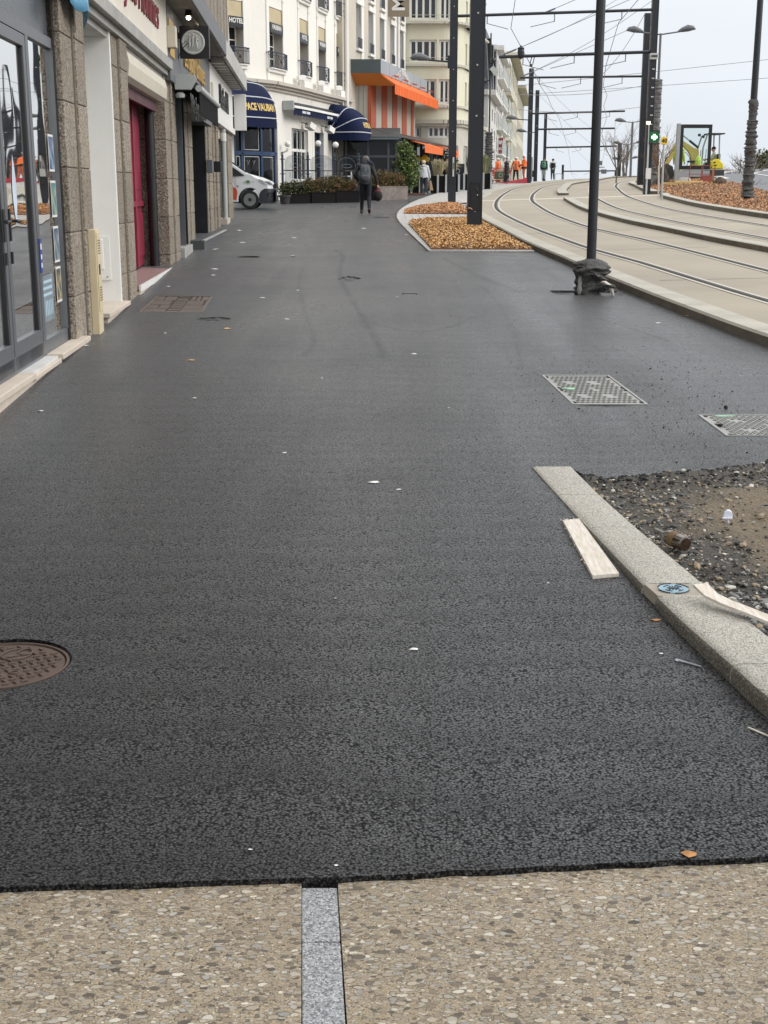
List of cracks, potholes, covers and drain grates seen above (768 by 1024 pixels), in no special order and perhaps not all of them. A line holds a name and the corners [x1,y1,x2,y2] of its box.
manhole cover [542,375,648,405]
manhole cover [139,295,212,313]
manhole cover [0,642,70,690]
manhole cover [698,415,768,436]
